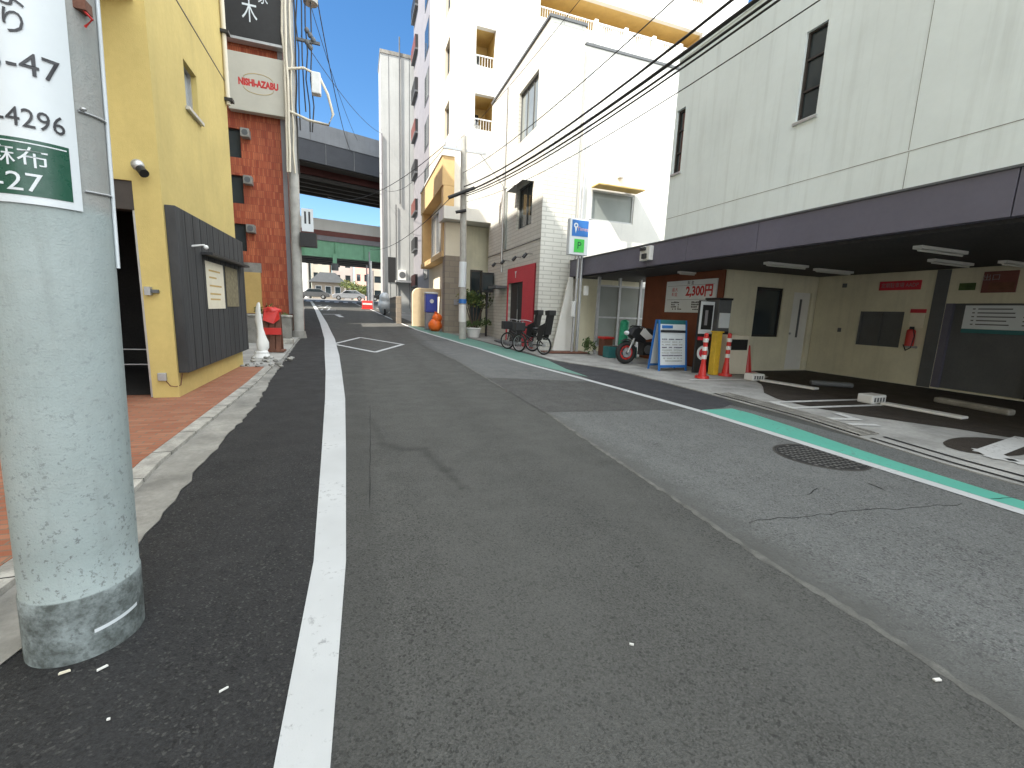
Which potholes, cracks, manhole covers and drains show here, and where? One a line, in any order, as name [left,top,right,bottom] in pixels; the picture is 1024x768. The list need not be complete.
crack [749,503,962,523]
manhole cover [772,444,872,471]
